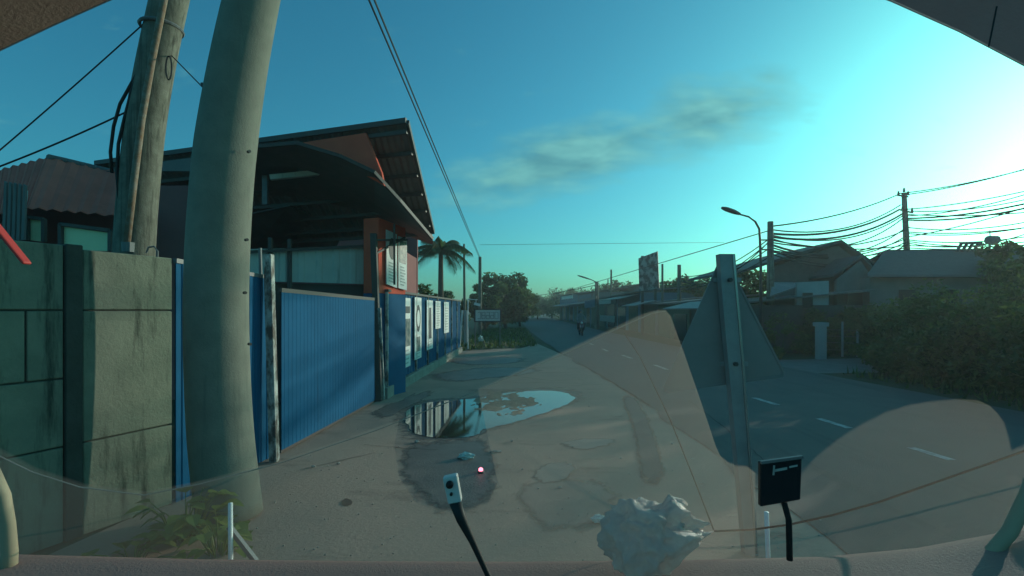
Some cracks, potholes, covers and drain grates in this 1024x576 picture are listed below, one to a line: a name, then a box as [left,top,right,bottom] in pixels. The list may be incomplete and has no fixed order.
pothole [404,391,575,438]
